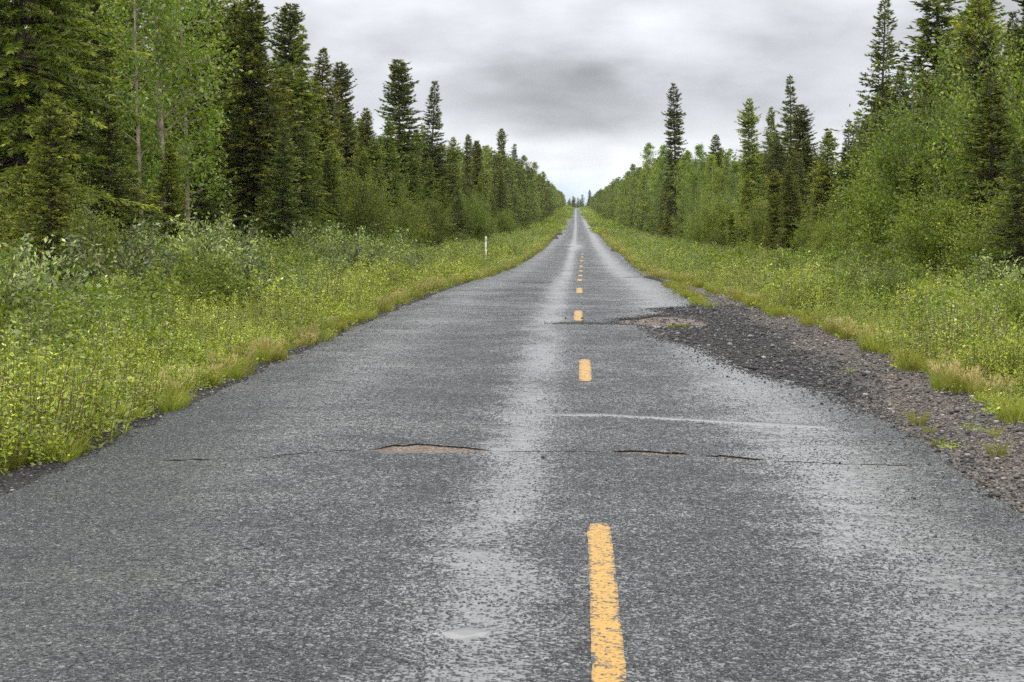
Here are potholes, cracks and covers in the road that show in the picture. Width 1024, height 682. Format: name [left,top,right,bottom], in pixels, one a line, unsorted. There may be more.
pothole [620,317,709,329]
pothole [367,443,492,453]
crack [242,449,360,459]
